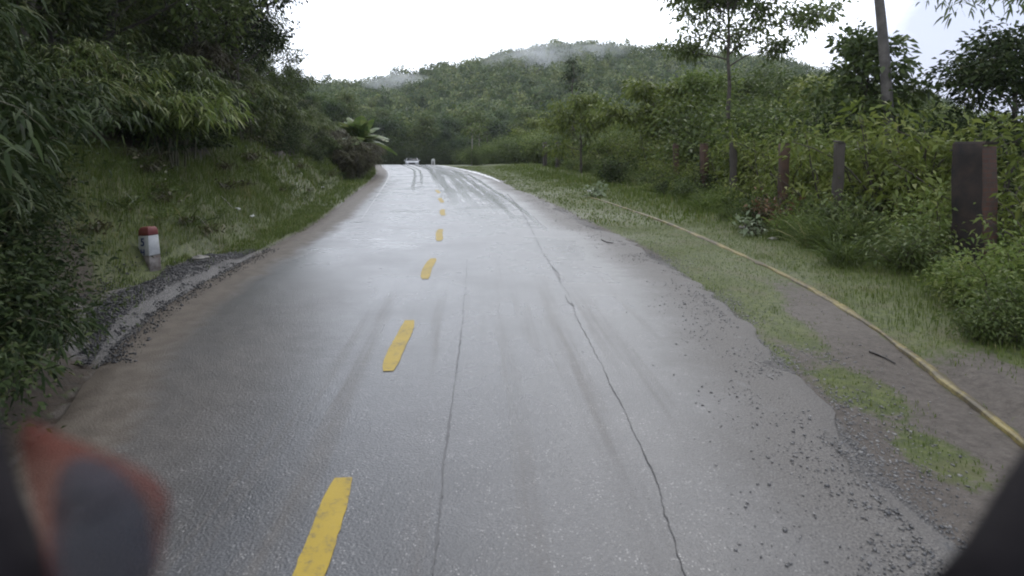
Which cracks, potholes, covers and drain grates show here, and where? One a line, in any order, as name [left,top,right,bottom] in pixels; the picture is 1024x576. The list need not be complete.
crack [507,194,686,576]
